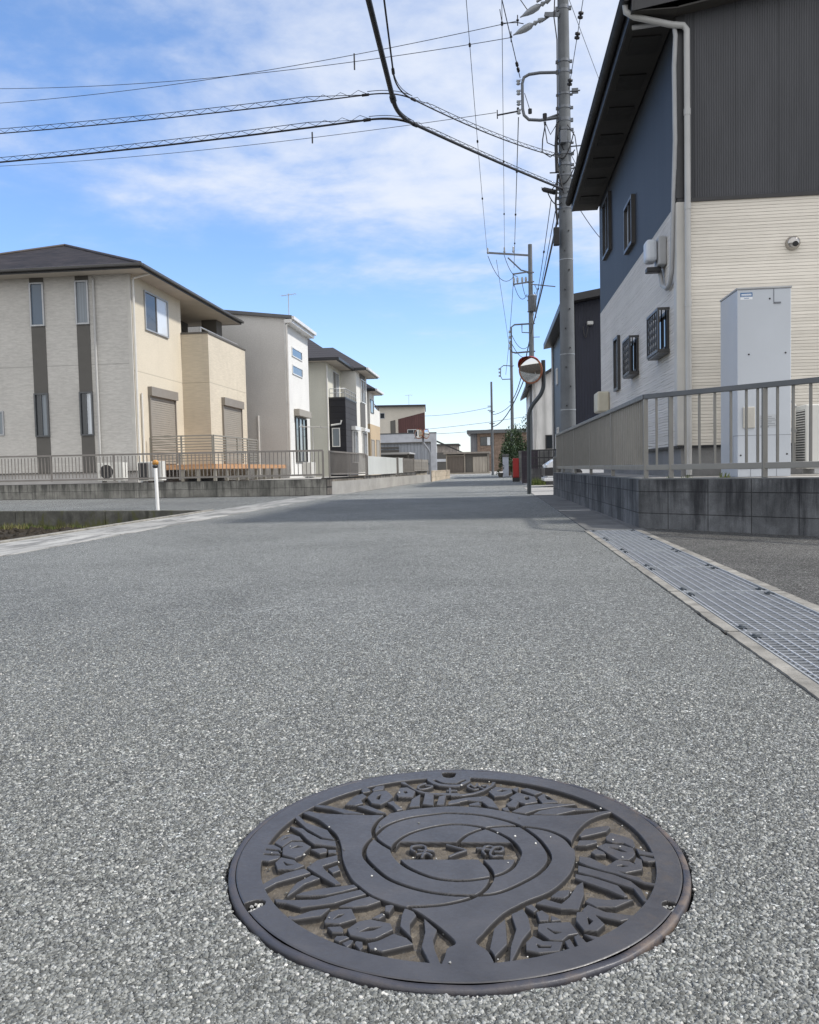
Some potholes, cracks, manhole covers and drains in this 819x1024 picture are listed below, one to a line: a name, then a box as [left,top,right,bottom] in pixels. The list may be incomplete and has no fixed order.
drain grate [681,591,819,632]
drain grate [620,550,715,567]
drain grate [590,529,652,539]
drain grate [644,566,770,592]
manhole cover [228,770,692,998]
drain grate [603,538,679,551]
